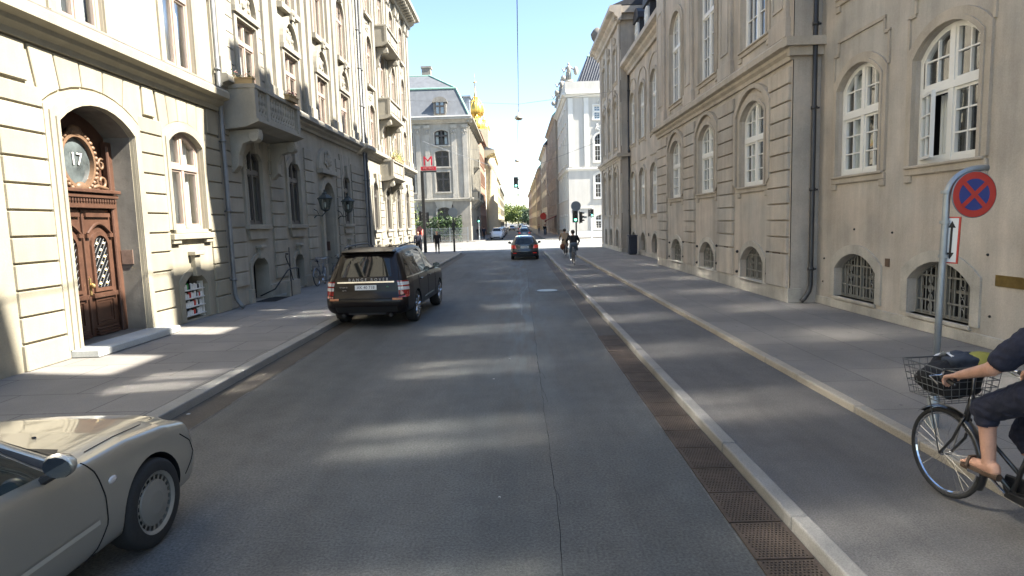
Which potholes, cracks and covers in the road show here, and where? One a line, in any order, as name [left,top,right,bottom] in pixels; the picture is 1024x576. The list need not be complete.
drain grate [692,468,755,494]
drain grate [678,447,734,469]
drain grate [731,522,814,561]
drain grate [624,373,657,383]
drain grate [637,391,675,404]
drain grate [709,492,781,523]
drain grate [757,559,830,576]
drain grate [618,365,650,373]
drain grate [631,381,666,392]
drain grate [646,402,687,417]
drain grate [665,430,715,449]
crack [520,270,563,575]
